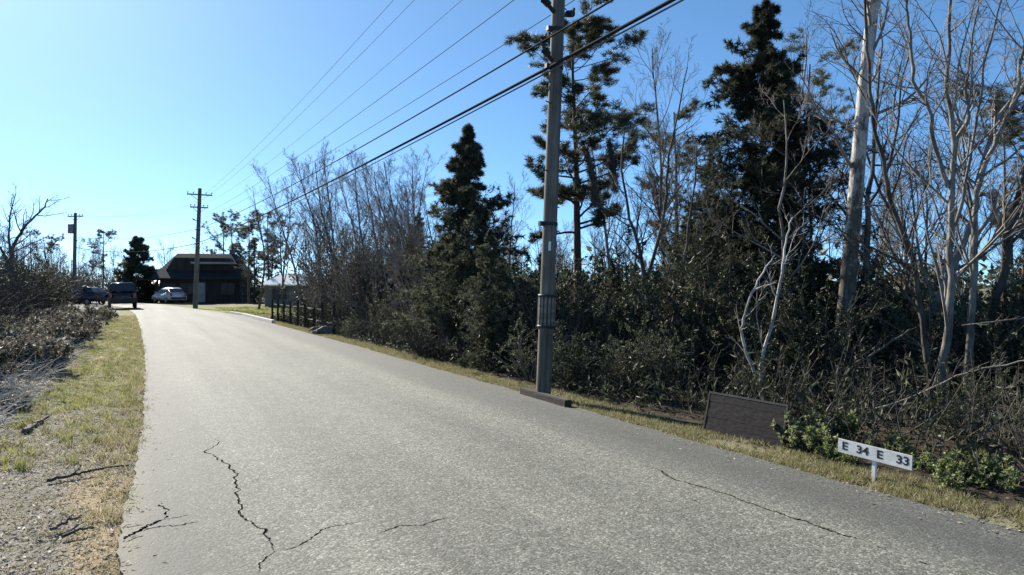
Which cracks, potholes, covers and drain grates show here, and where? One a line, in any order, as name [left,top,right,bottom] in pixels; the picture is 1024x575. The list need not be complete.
crack [121,489,195,542]
crack [203,439,350,572]
crack [647,466,930,566]
